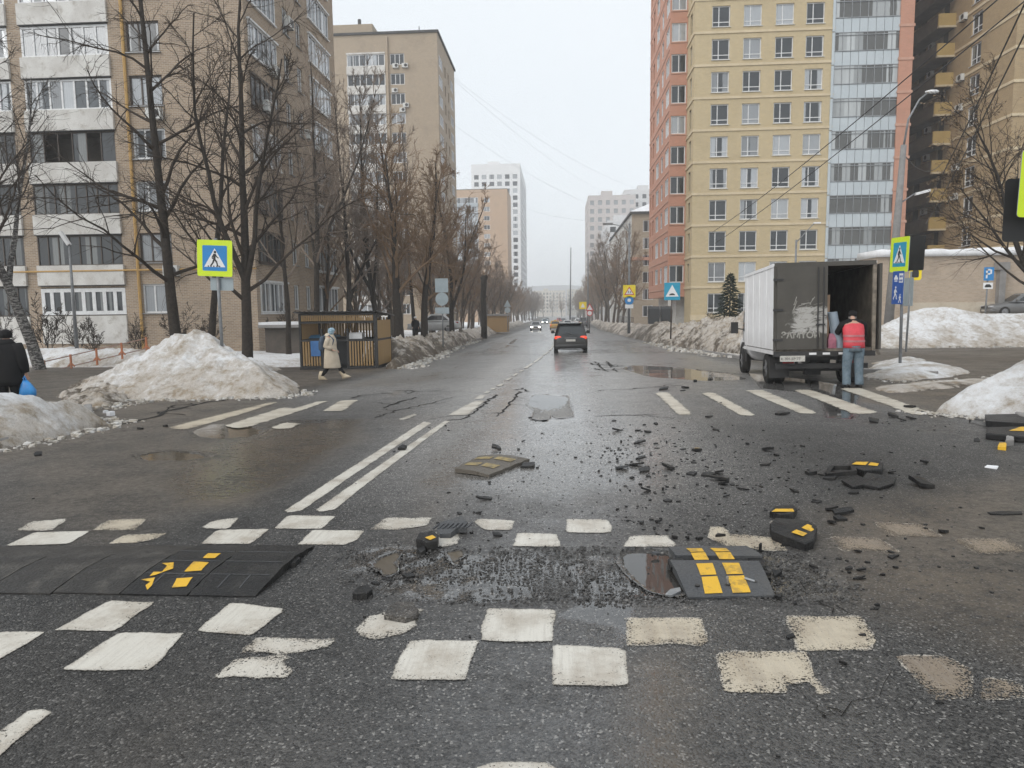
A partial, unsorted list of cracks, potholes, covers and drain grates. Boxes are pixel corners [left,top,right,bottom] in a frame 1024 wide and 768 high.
pothole [366,550,402,577]
pothole [444,548,468,566]
crack [352,388,527,420]
pothole [616,546,686,596]
pothole [134,450,213,461]
crack [540,352,748,391]
crack [122,400,224,424]
pothole [188,424,269,439]
pothole [526,394,574,422]
